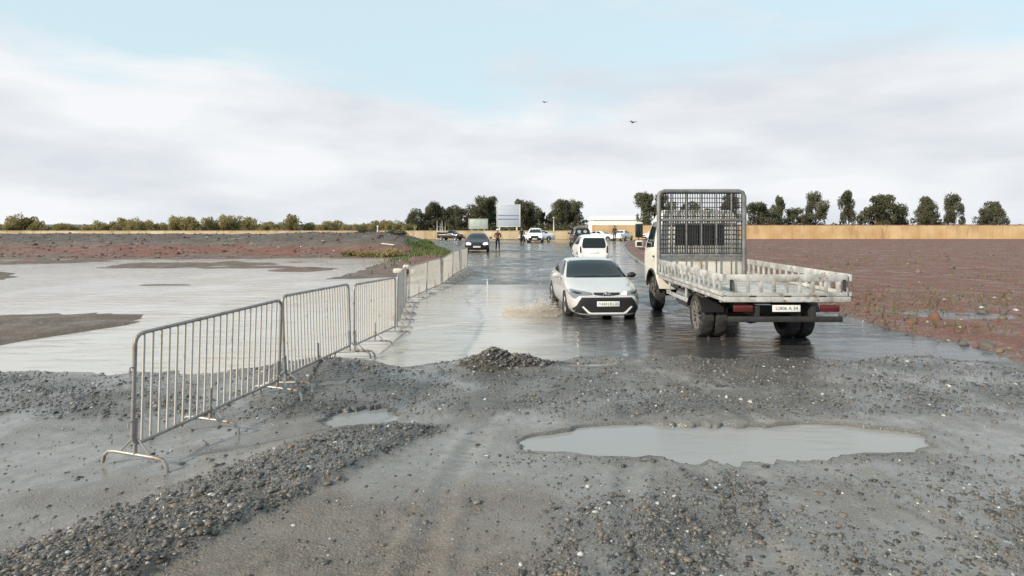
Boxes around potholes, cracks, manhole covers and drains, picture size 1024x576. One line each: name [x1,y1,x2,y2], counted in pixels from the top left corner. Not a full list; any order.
pothole [310,403,412,429]
pothole [509,420,941,471]
